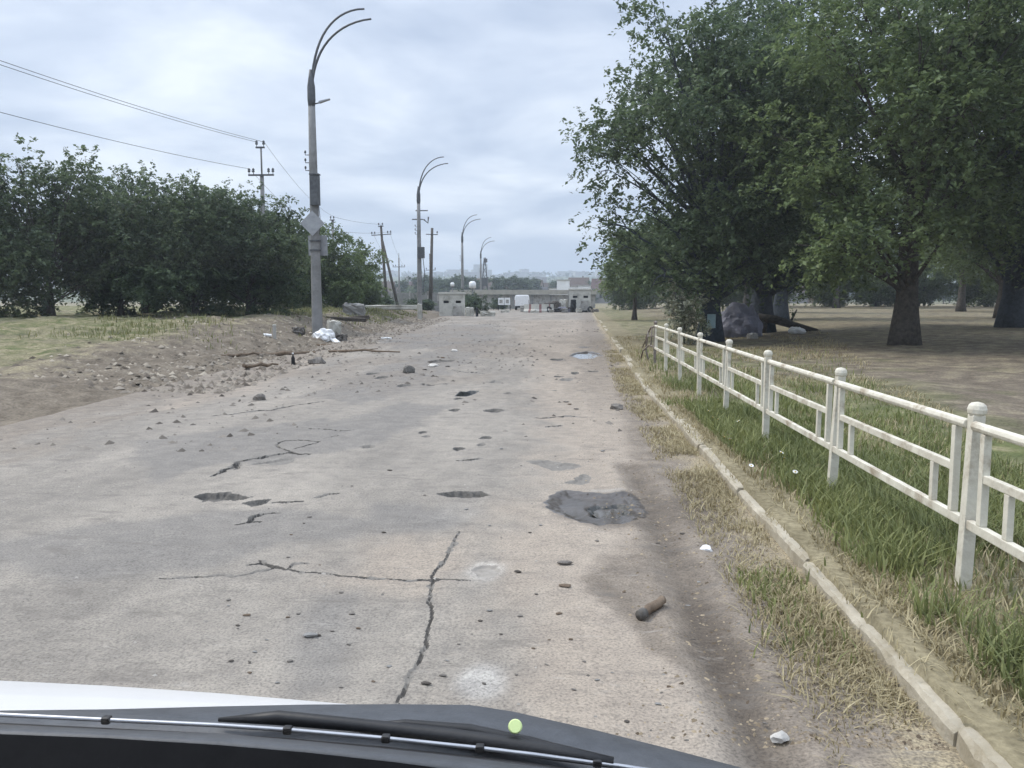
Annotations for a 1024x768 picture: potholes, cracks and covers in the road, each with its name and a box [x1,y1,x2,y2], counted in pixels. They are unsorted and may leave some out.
crack [142,527,505,704]
pothole [526,487,665,531]
pothole [564,351,607,360]
crack [199,401,366,529]
pothole [228,497,282,511]
pothole [424,488,503,501]
pothole [179,490,266,506]
pothole [446,390,486,398]
